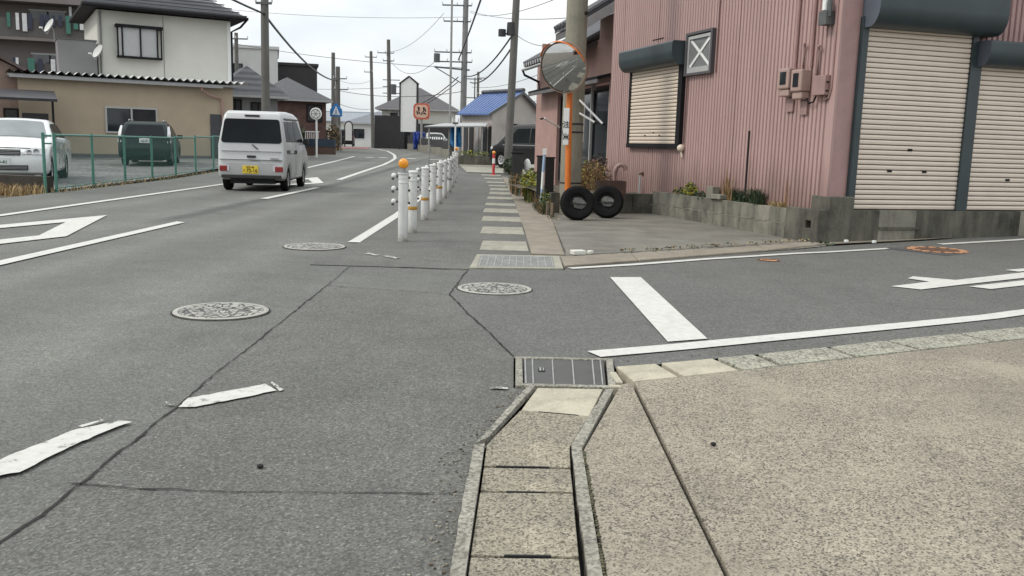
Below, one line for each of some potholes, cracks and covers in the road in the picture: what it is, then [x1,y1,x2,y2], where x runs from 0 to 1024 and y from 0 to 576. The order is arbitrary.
manhole cover [456,282,533,295]
drain grate [469,254,564,270]
manhole cover [887,246,970,256]
manhole cover [282,243,346,251]
crack [0,266,514,542]
manhole cover [170,302,271,321]
